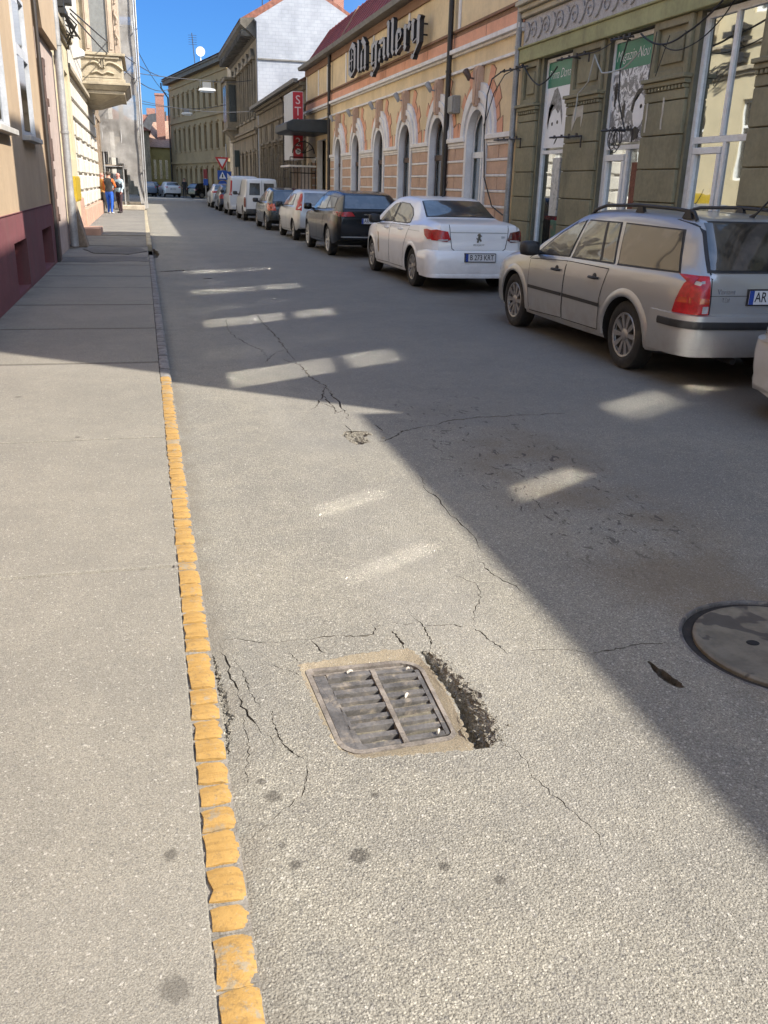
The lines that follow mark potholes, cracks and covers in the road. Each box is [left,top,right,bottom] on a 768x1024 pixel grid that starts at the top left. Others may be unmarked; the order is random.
pothole [420,647,514,749]
pothole [647,661,685,688]
manhole cover [679,600,768,691]
pothole [341,431,385,445]
crack [499,740,609,861]
crack [225,318,352,432]
crack [526,643,663,653]
crack [375,413,562,442]
drain grate [298,648,474,758]
crack [221,476,525,840]
